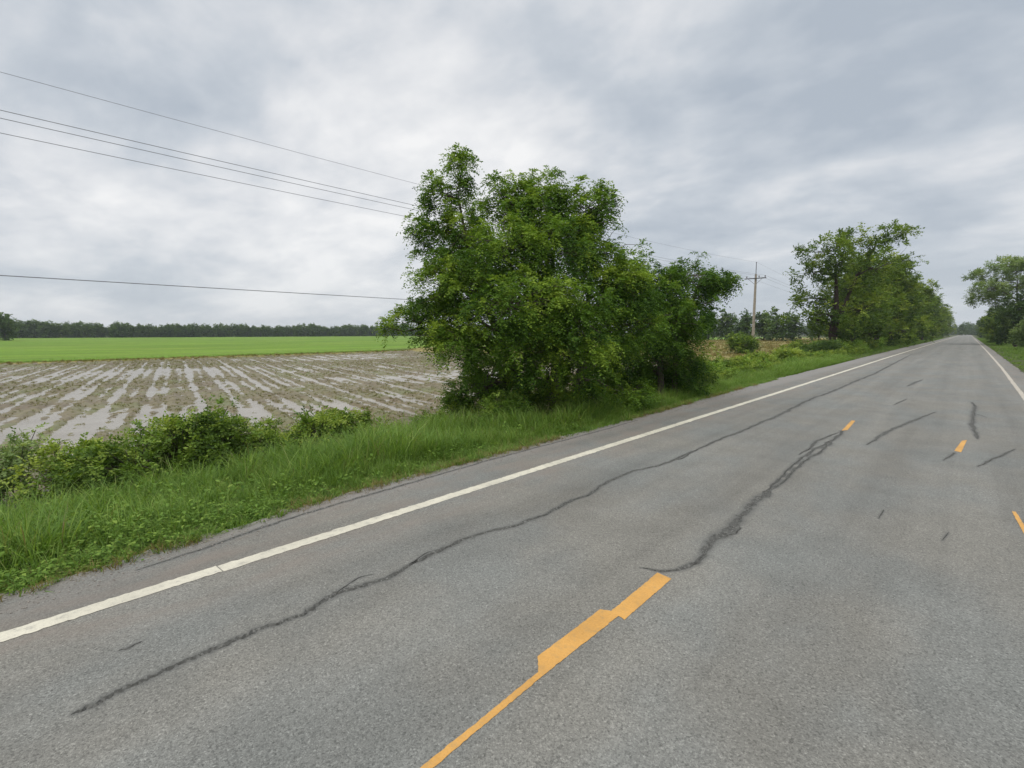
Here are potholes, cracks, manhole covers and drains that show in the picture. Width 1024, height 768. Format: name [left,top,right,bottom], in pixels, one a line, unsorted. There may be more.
crack [71,354,1015,715]
